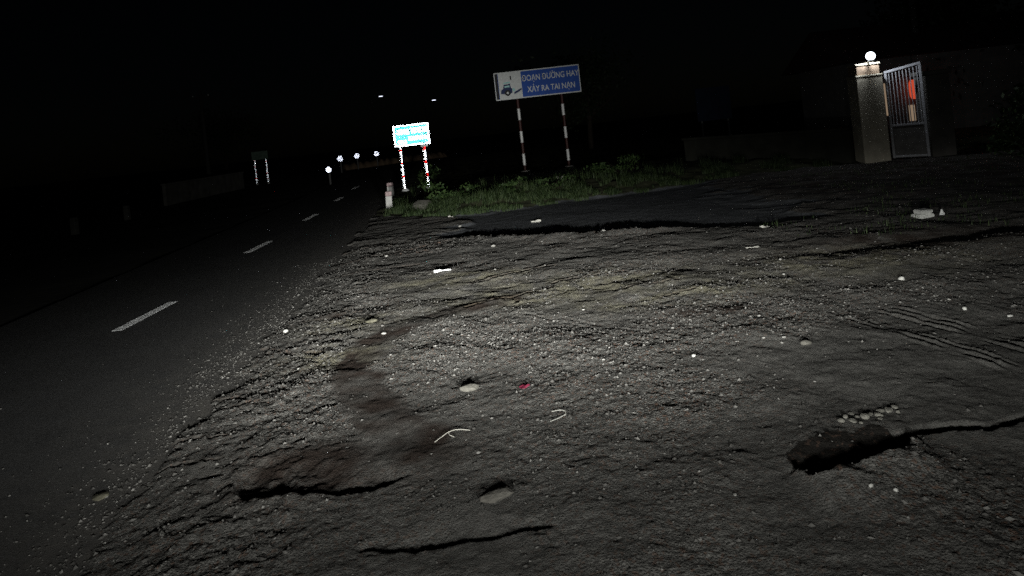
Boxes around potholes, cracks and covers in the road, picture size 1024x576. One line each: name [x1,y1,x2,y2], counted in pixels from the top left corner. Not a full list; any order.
pothole [229,441,405,502]
pothole [785,424,921,475]
